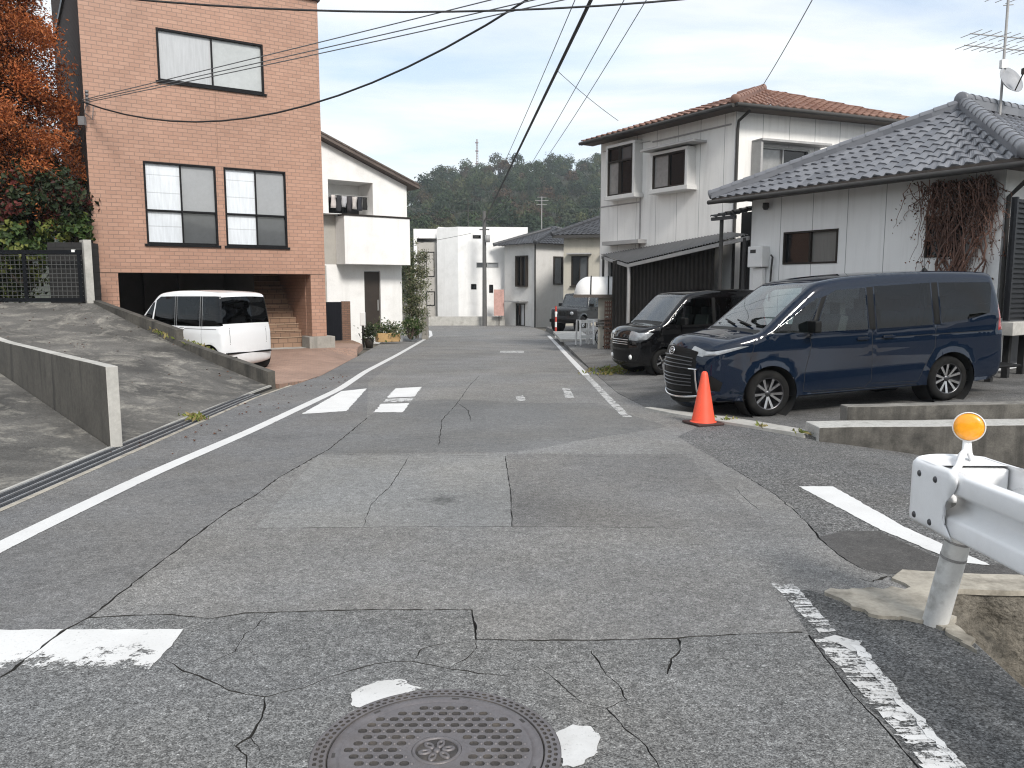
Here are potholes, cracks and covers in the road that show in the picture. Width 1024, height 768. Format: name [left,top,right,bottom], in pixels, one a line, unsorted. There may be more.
drain grate [84,442,151,460]
crack [438,378,477,444]
crack [0,419,919,768]
drain grate [33,459,112,483]
drain grate [126,428,184,444]
drain grate [0,480,64,511]
drain grate [160,418,206,430]
drain grate [211,400,245,410]
manhole cover [308,689,562,768]
drain grate [197,408,229,418]
